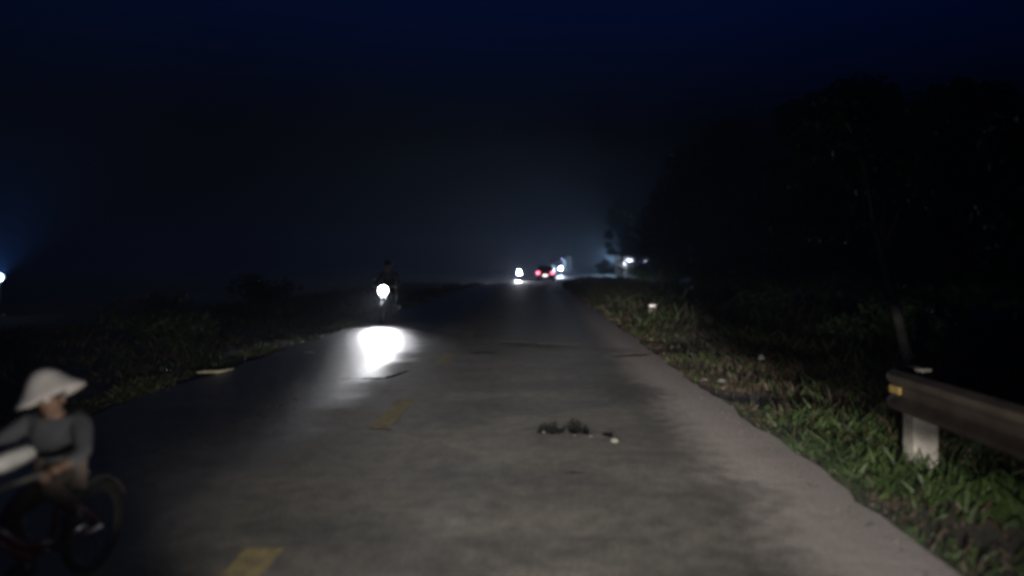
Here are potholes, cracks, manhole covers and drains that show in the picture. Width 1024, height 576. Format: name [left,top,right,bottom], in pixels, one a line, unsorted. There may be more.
pothole [563,417,590,435]
pothole [537,420,568,434]
